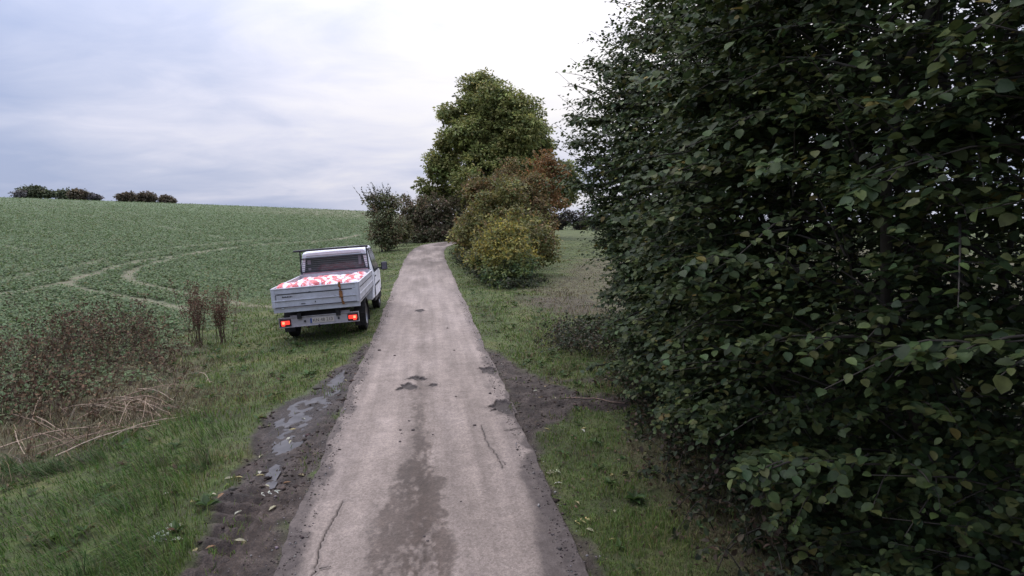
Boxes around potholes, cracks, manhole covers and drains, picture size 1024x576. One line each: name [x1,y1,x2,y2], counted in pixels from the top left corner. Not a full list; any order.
crack [480,425,523,468]
pothole [393,381,421,391]
crack [308,501,345,576]
pothole [484,398,517,415]
pothole [477,366,499,375]
